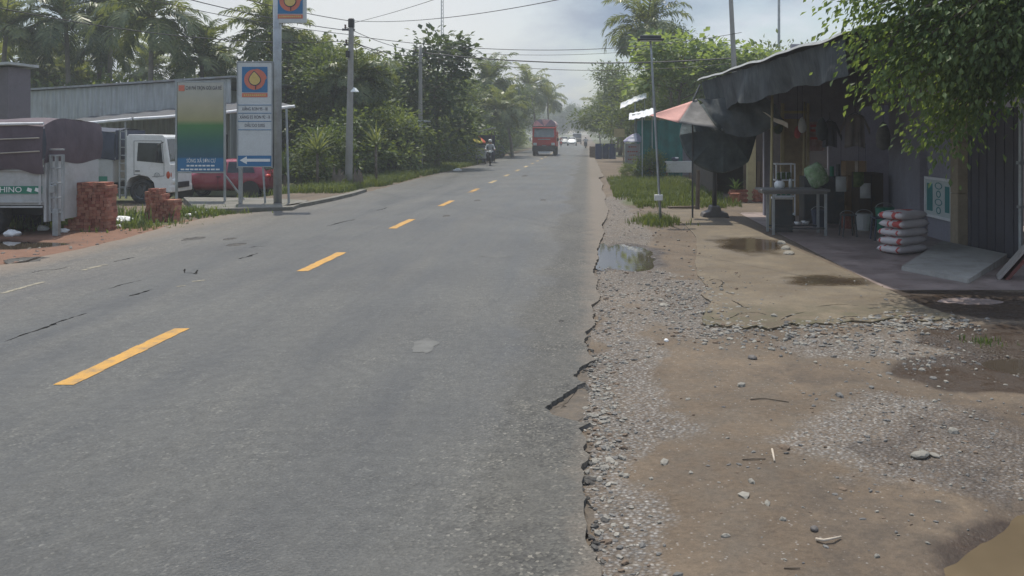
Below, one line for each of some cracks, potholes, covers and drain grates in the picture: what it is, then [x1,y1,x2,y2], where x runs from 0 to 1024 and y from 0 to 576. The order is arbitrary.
pothole [546,383,592,421]
crack [7,313,86,341]
